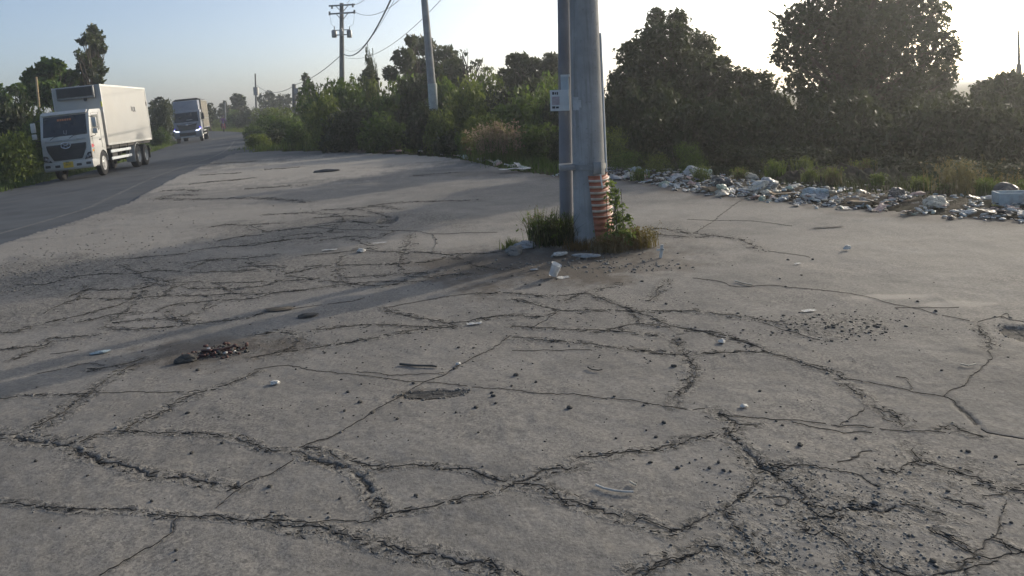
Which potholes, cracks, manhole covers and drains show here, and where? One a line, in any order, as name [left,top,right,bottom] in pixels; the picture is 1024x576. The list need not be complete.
crack [0,160,1024,576]
pothole [994,323,1024,342]
pothole [393,388,475,401]
